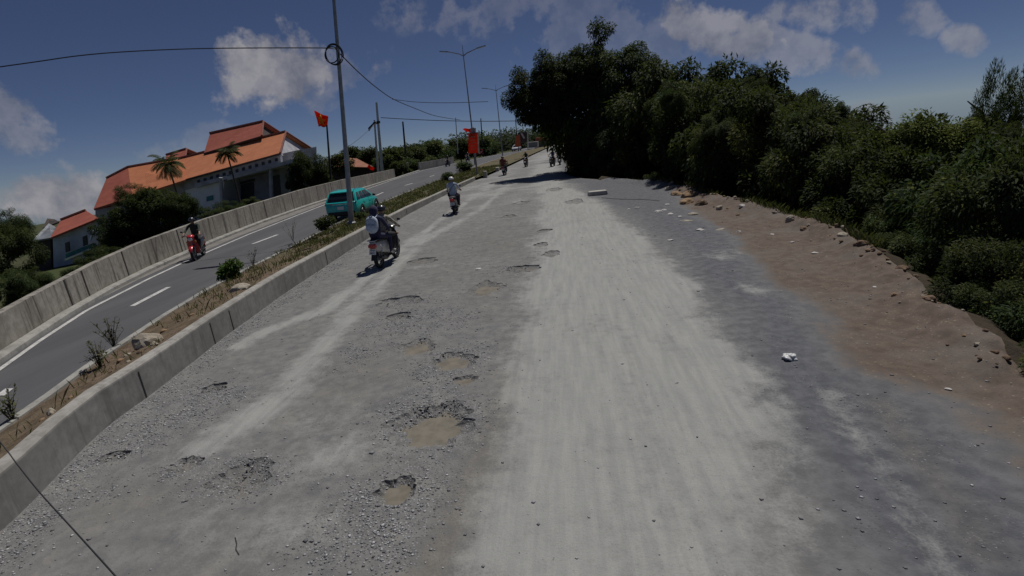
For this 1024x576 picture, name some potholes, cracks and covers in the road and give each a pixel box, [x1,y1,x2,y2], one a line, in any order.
pothole [375,295,424,307]
pothole [397,338,437,358]
pothole [94,450,133,463]
pothole [407,257,438,265]
pothole [385,312,411,321]
pothole [380,400,477,450]
pothole [429,352,480,371]
pothole [371,475,417,509]
pothole [465,280,507,297]
pothole [199,457,274,501]
pothole [165,455,205,474]
pothole [505,265,542,273]
